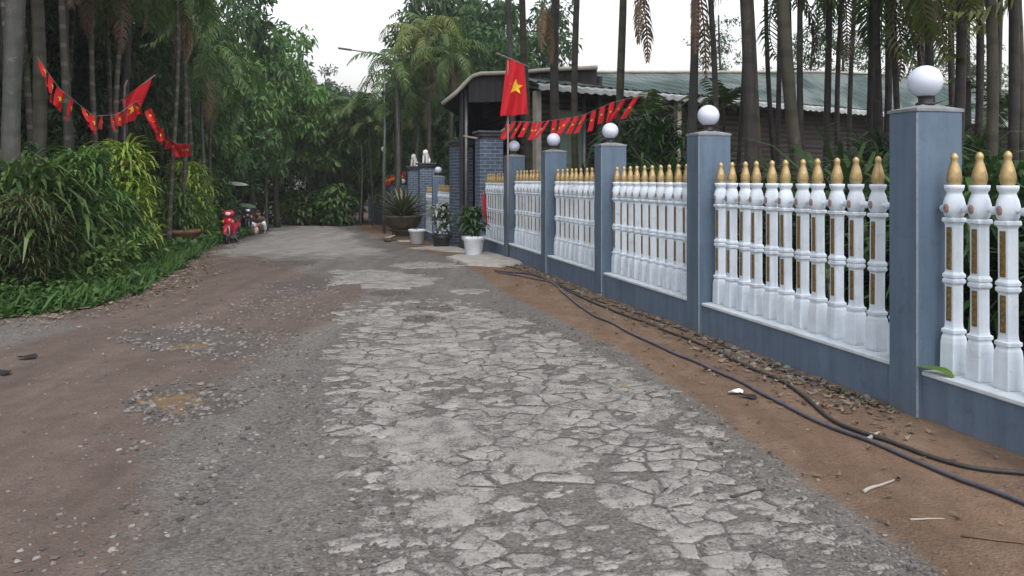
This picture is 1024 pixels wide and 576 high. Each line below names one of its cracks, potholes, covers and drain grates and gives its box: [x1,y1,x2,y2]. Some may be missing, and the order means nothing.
pothole [107,323,285,359]
crack [315,301,809,576]
pothole [102,380,257,426]
